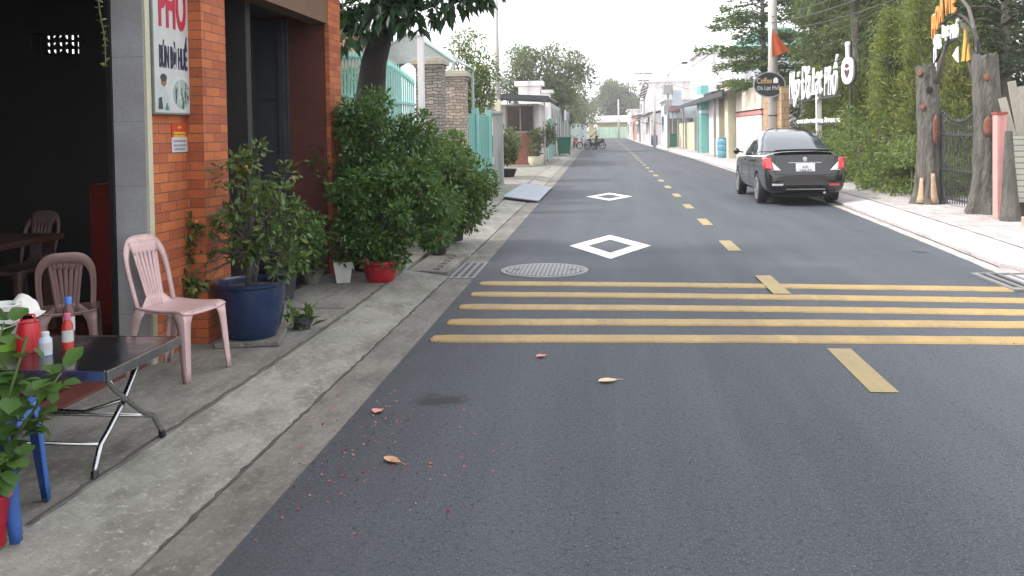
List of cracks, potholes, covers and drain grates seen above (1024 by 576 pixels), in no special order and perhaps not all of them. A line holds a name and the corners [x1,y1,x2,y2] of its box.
manhole cover [501,263,589,278]
drain grate [971,273,1024,292]
drain grate [448,262,488,279]
